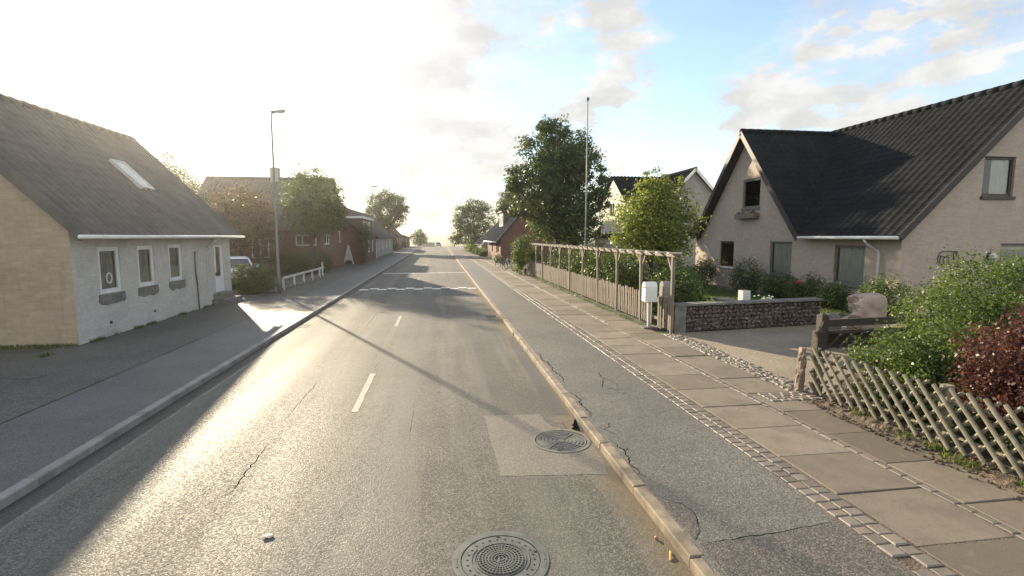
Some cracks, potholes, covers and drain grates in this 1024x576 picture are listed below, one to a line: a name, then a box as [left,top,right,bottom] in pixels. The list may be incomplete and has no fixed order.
manhole cover [452,530,549,576]
crack [536,352,646,478]
manhole cover [532,429,591,453]
